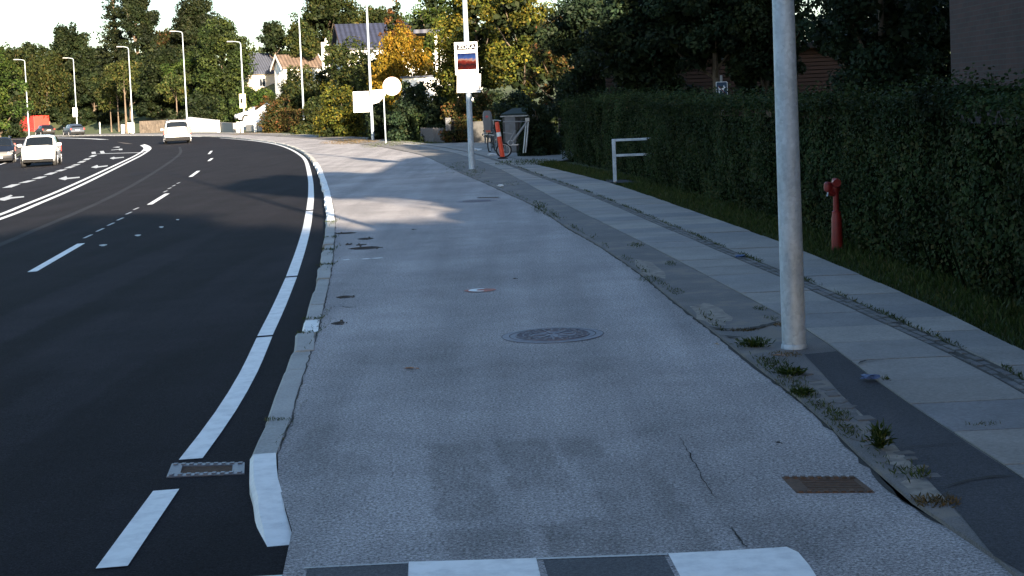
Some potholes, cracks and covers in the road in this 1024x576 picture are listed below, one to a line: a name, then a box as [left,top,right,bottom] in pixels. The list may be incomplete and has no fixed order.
manhole cover [501,327,604,343]
drain grate [167,461,245,478]
drain grate [782,475,875,493]
crack [681,439,713,495]
